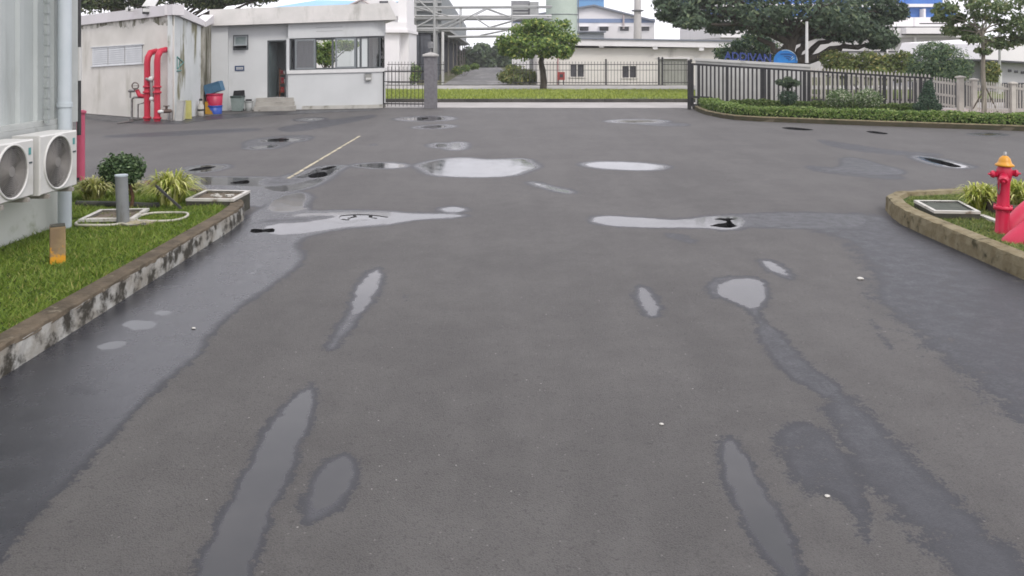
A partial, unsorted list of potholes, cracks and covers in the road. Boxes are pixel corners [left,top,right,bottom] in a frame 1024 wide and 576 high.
pothole [710,218,736,228]
